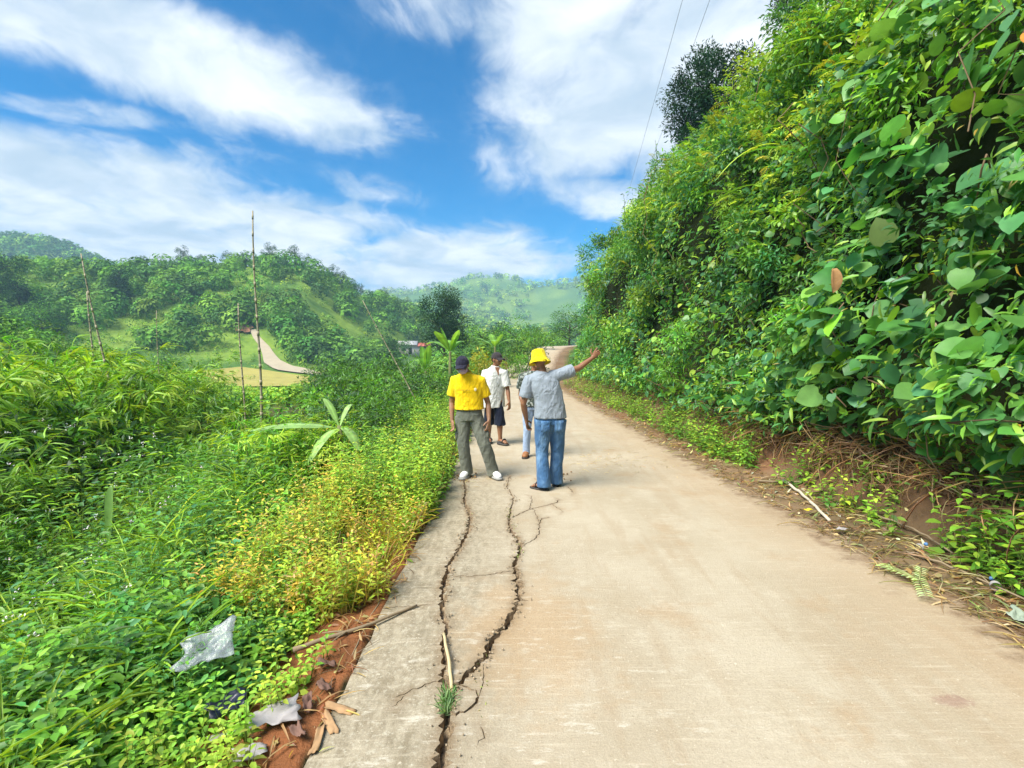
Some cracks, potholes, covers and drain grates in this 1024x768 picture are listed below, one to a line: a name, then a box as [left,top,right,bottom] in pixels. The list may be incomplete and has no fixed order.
crack [389,479,572,768]
